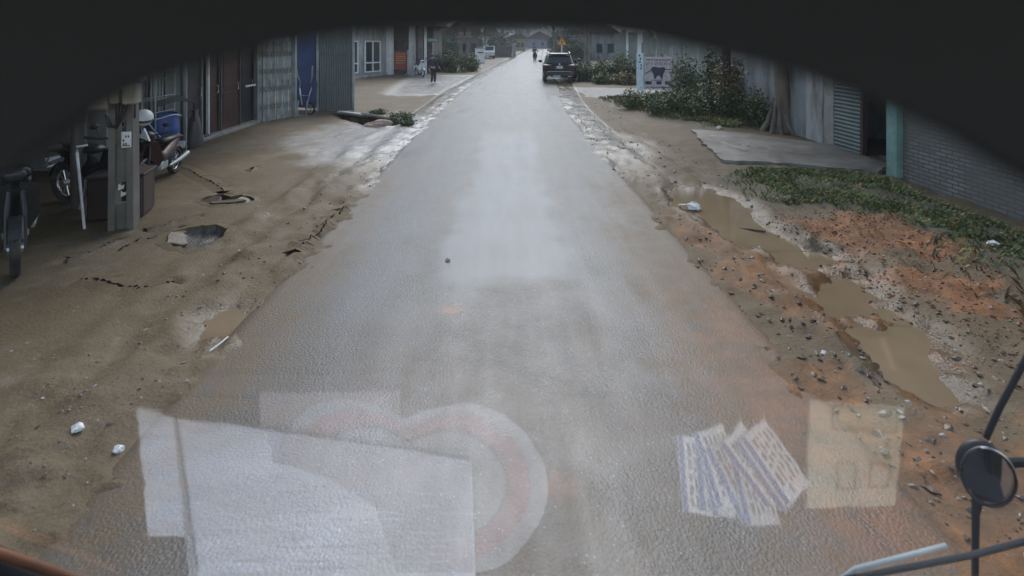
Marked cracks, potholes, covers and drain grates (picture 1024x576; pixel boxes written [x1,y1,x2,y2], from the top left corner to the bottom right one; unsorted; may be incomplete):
crack [282,206,351,252]
pothole [192,193,261,208]
pothole [154,223,237,255]
crack [65,216,206,297]
